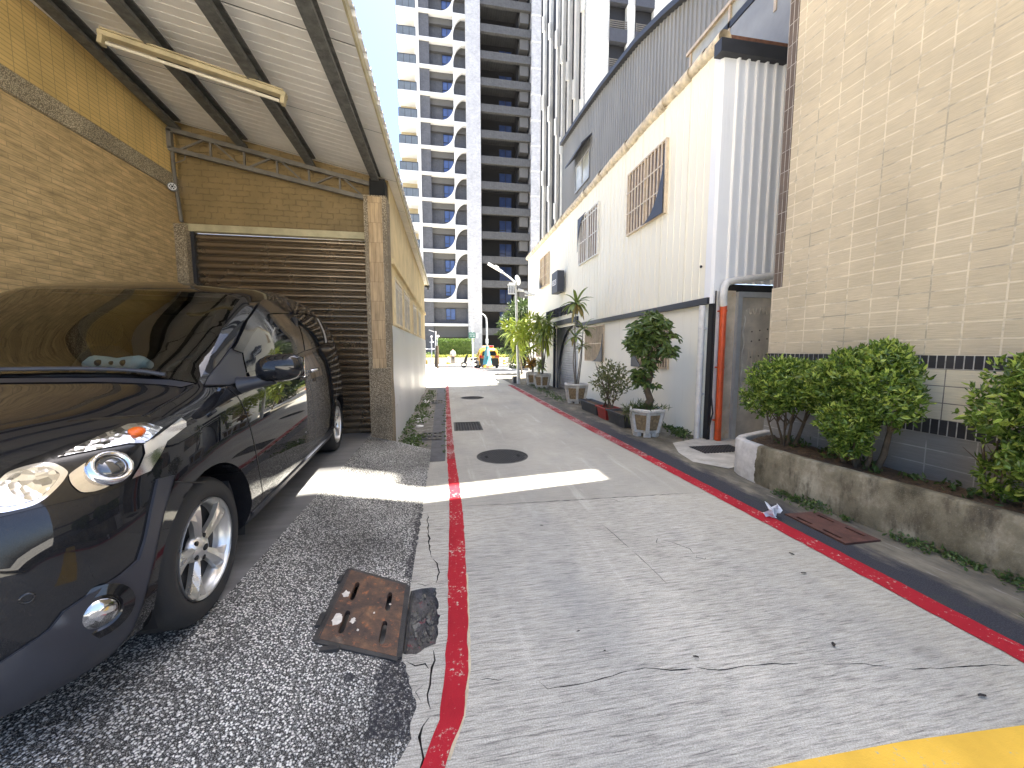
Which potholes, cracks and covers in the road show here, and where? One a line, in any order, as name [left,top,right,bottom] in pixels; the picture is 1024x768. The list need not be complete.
crack [408,650,436,768]
crack [540,663,1010,689]
crack [417,514,440,586]
manhole cover [477,449,528,464]
drain grate [689,445,735,453]
pothole [403,587,440,655]
